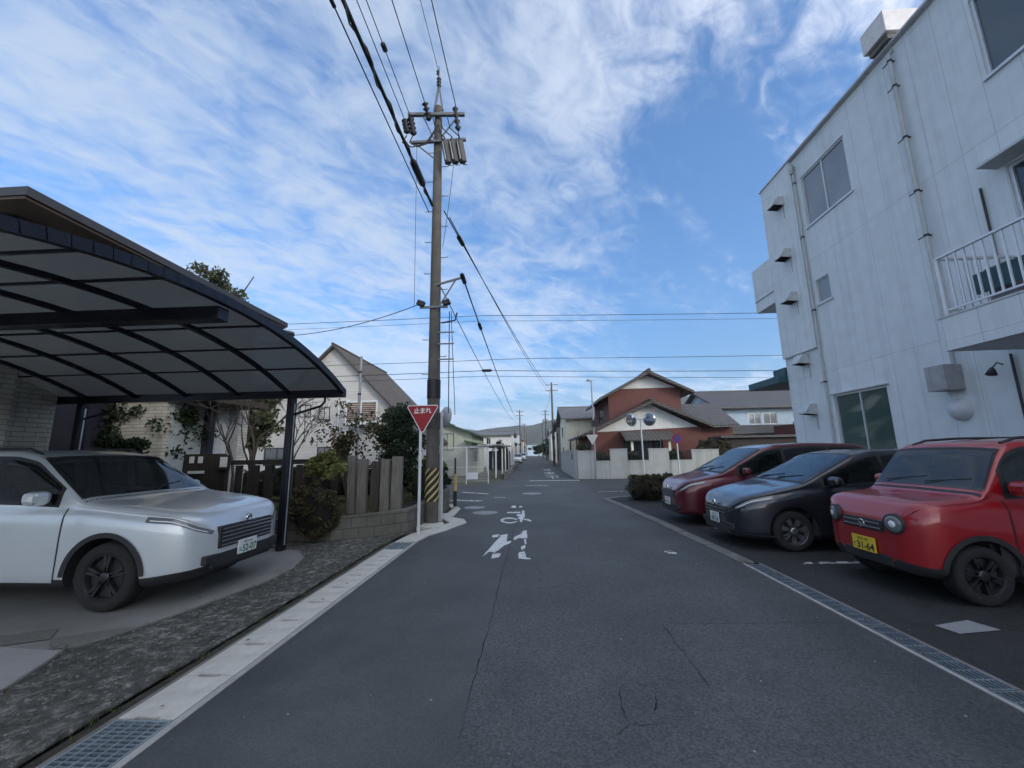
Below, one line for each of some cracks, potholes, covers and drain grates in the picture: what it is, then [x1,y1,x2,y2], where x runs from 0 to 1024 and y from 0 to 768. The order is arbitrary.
crack [459,526,515,739]
crack [617,689,658,735]
drain grate [385,542,414,550]
drain grate [794,588,884,626]
drain grate [990,690,1024,709]
drain grate [866,626,1018,691]
drain grate [41,719,173,768]
drain grate [747,564,808,589]
